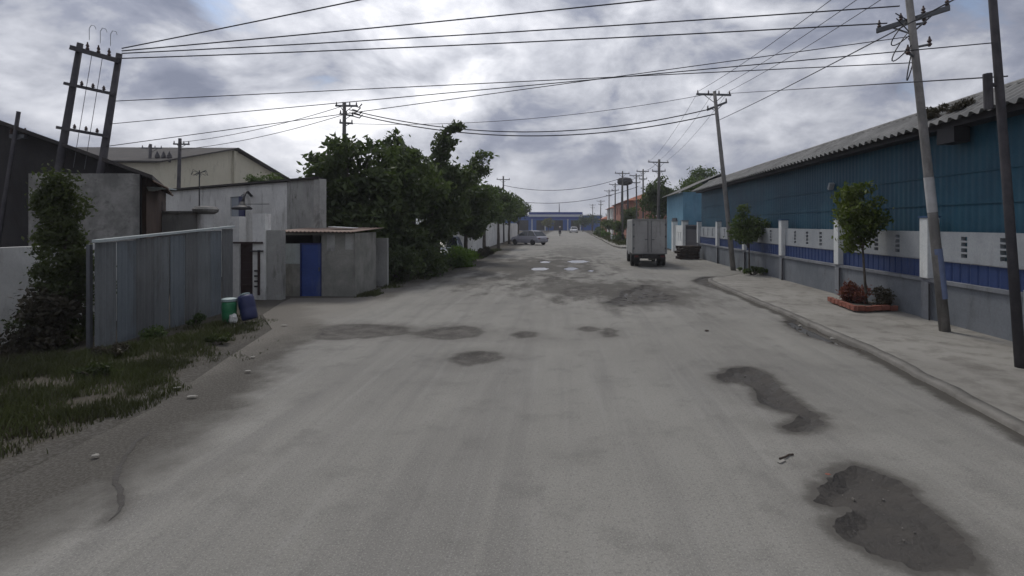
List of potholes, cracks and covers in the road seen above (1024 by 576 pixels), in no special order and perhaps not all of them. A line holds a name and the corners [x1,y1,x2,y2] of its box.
pothole [813,465,976,572]
crack [110,429,150,520]
pothole [716,367,824,432]
